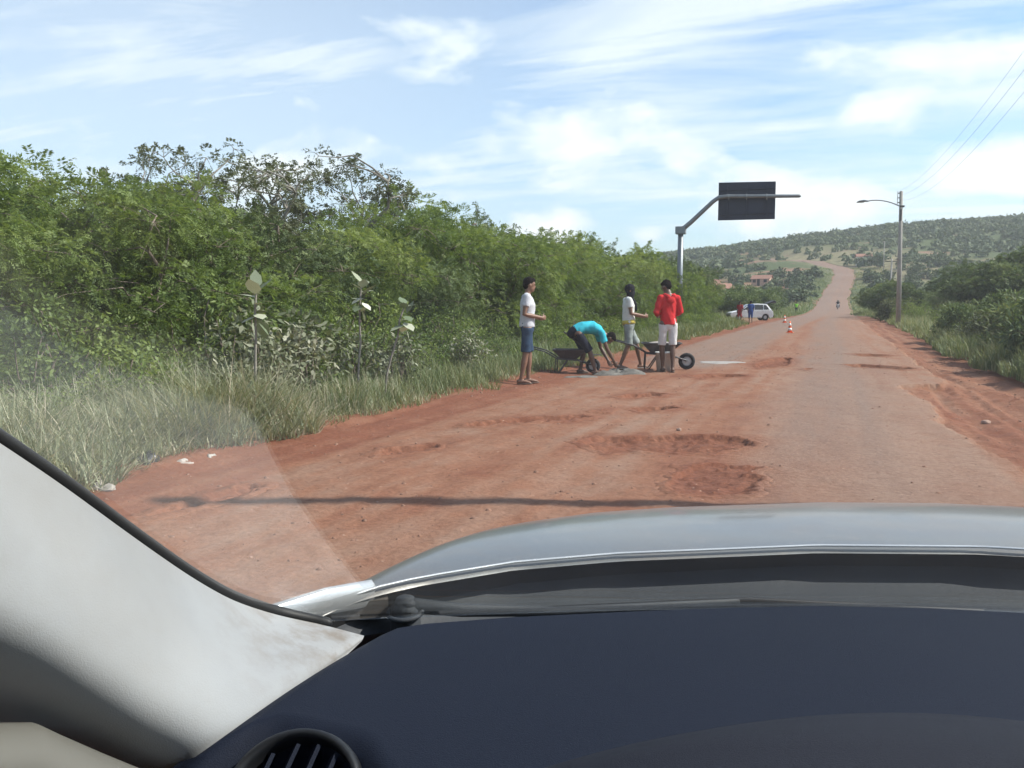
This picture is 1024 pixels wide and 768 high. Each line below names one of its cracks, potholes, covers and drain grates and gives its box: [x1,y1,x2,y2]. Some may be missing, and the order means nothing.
pothole [360,442,447,459]
pothole [452,413,602,428]
pothole [750,357,796,369]
pothole [564,433,768,456]
pothole [655,460,773,499]
pothole [608,392,674,400]
